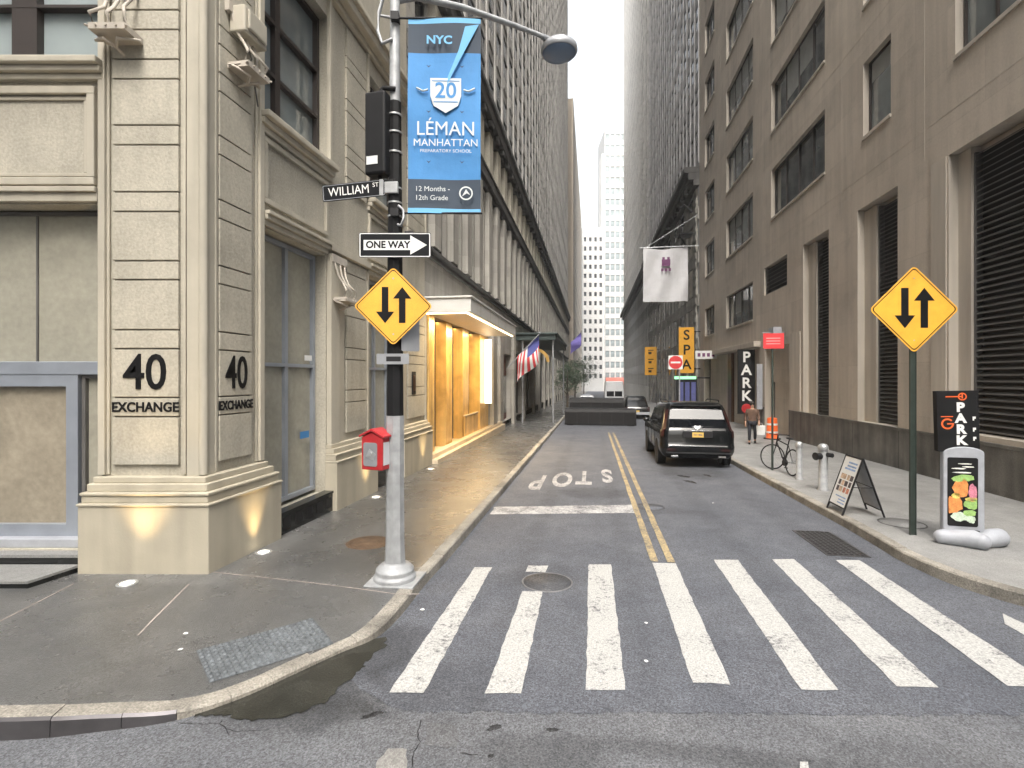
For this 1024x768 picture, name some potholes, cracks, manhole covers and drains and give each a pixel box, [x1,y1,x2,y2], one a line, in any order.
crack [409,721,421,768]
manhole cover [345,536,386,550]
crack [181,721,267,735]
drain grate [792,530,871,558]
manhole cover [877,518,928,529]
manhole cover [522,572,573,592]
